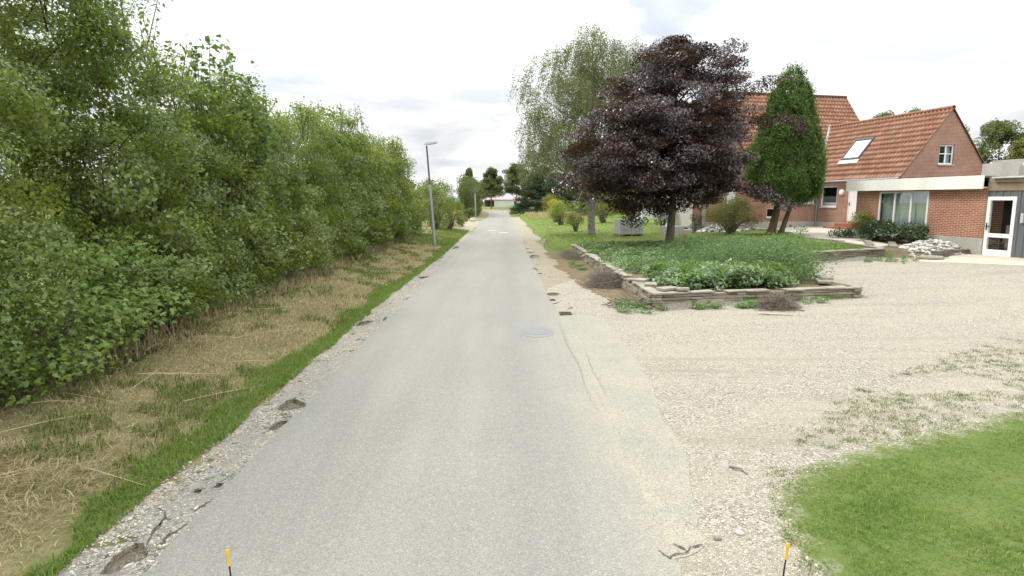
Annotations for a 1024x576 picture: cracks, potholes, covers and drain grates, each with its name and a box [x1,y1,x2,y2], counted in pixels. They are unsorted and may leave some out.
crack [562,330,603,409]
pothole [99,542,153,576]
pothole [276,398,306,413]
manhole cover [519,326,554,338]
crack [146,498,213,549]
crack [659,543,703,559]
